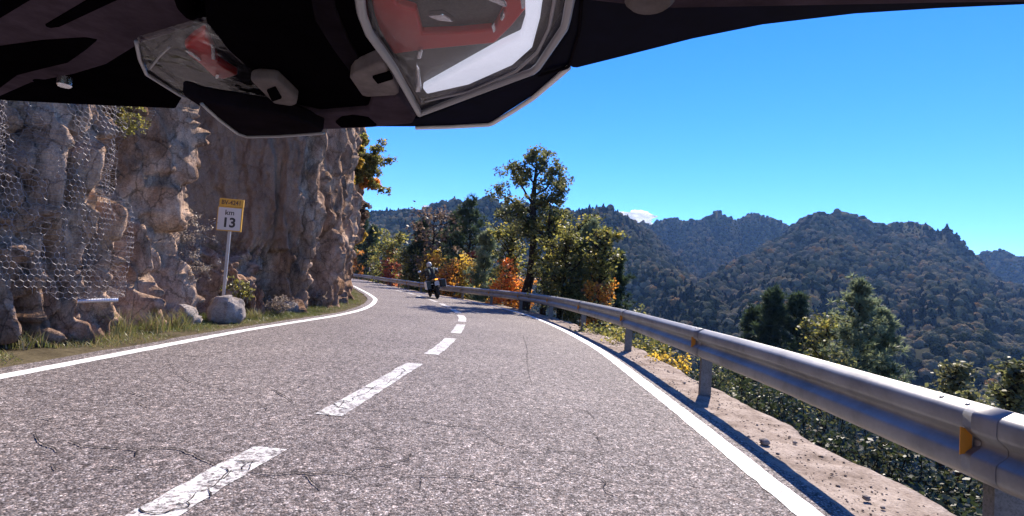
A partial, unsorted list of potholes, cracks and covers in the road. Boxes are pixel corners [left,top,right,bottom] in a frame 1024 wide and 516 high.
crack [411,410,625,499]
crack [32,367,538,513]
